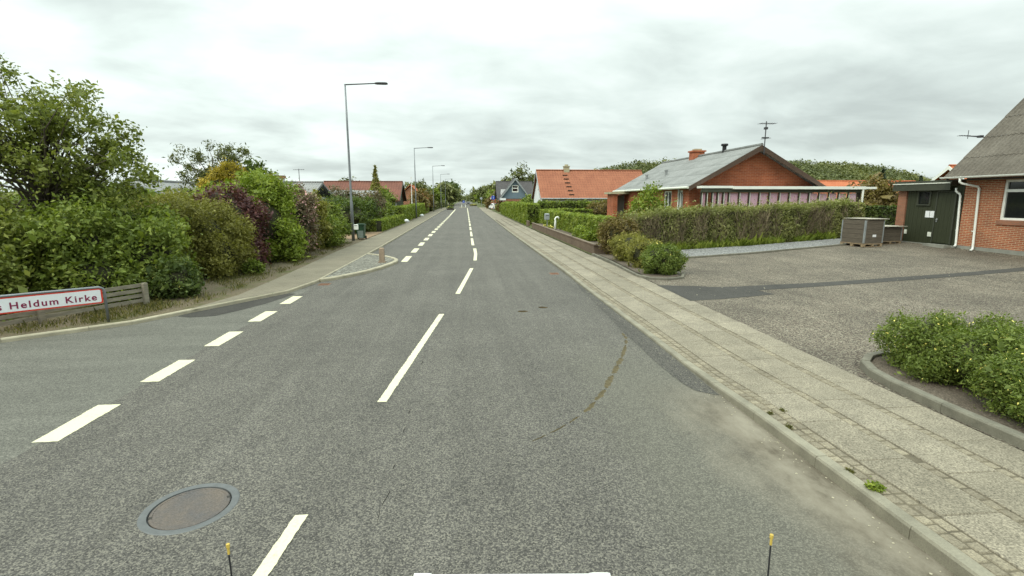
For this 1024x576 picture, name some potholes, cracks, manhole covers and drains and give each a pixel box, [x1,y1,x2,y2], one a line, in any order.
manhole cover [137,483,240,536]
crack [533,333,628,441]
